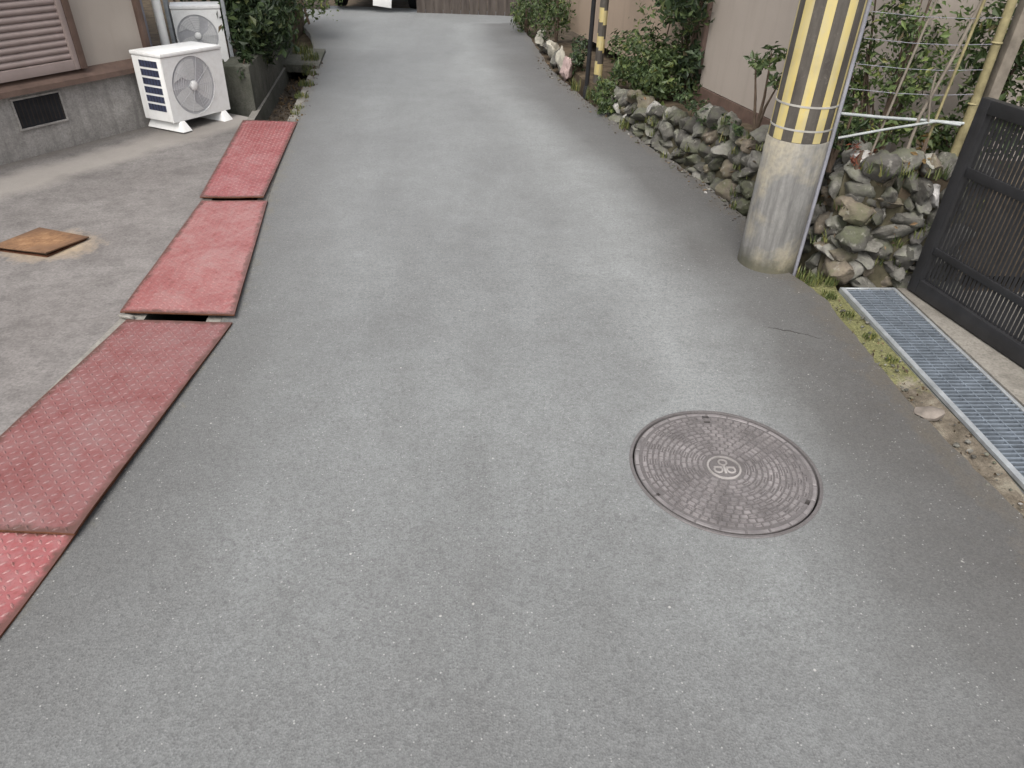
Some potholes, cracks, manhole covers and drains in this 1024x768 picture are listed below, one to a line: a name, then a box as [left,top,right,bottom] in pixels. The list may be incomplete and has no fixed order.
manhole cover [629,410,823,539]
drain grate [839,287,1024,494]
utility cover [0,227,89,257]
